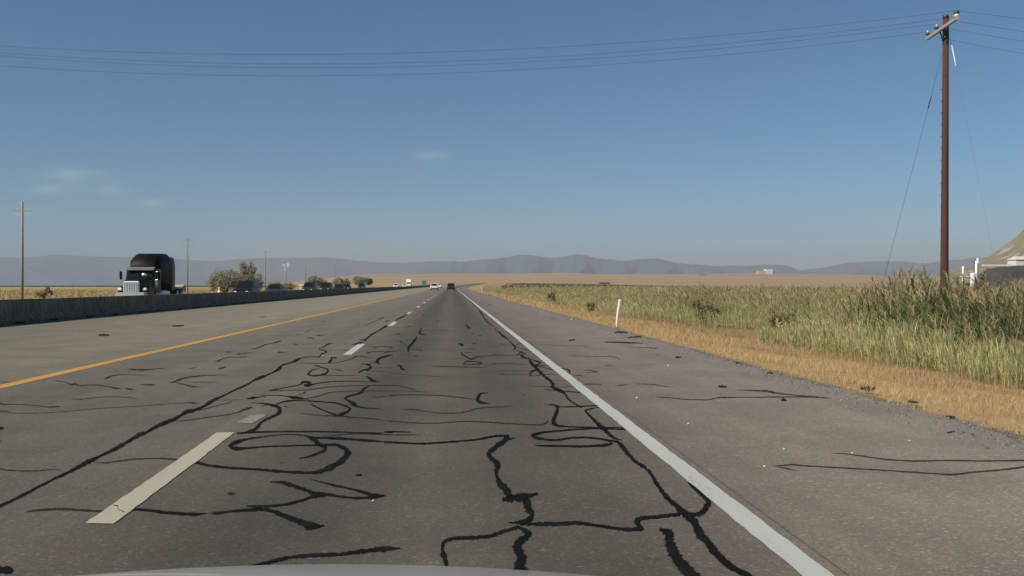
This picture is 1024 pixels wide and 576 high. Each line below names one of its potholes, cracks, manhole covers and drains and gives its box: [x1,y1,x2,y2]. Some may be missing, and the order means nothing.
crack [777,453,1024,475]
crack [650,384,827,400]
